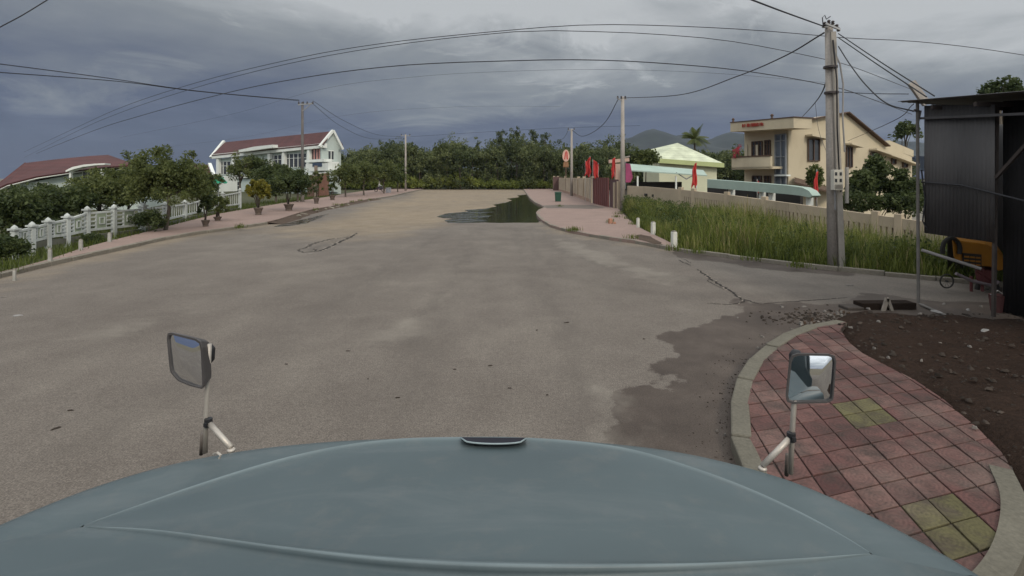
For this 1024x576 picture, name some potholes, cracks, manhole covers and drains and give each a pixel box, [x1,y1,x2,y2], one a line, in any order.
crack [297,233,356,252]
crack [679,260,759,305]
